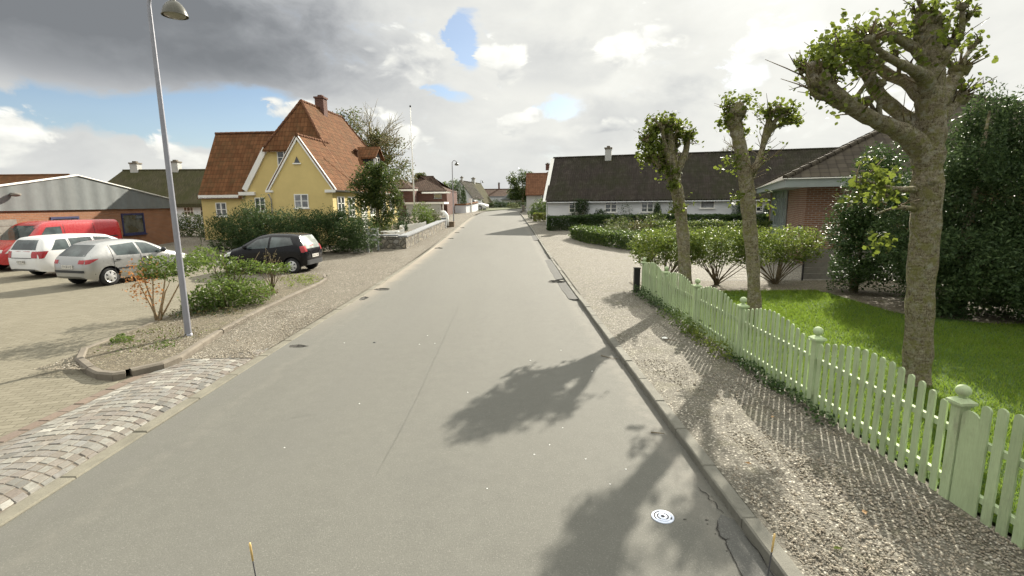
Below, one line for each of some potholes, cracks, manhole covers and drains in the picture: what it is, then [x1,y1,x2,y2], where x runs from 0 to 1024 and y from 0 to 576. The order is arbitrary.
crack [698,487,774,576]
manhole cover [651,510,674,524]
